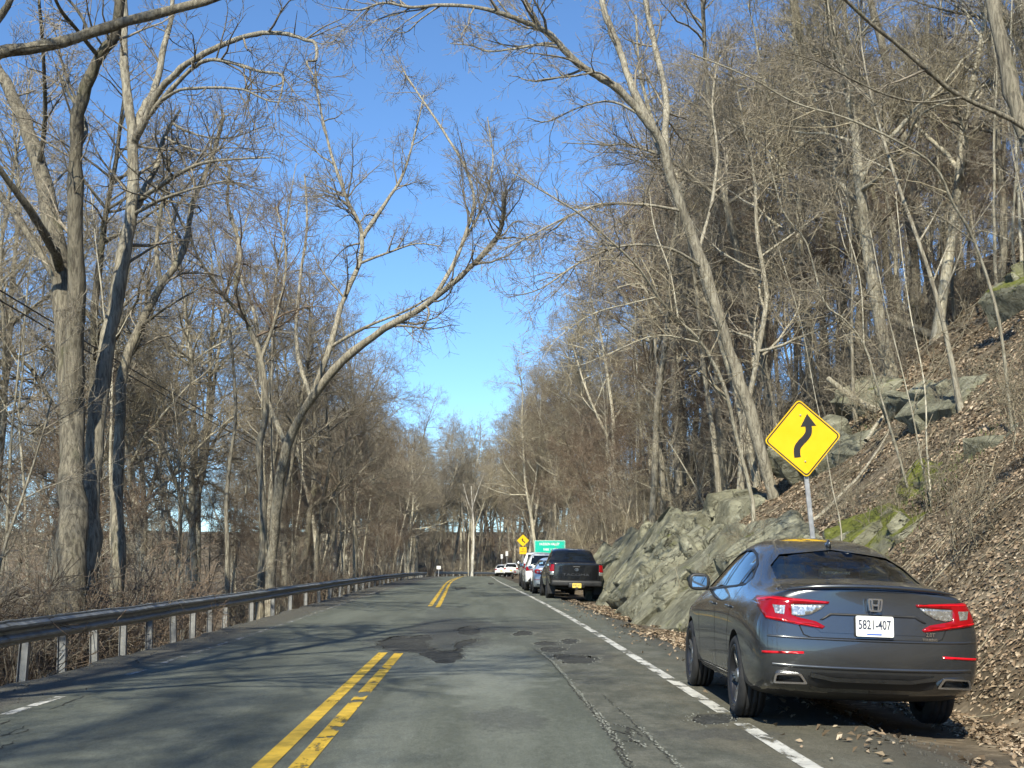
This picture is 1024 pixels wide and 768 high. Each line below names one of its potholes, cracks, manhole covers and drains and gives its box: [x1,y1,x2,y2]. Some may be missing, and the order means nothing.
crack [529,647,684,768]
